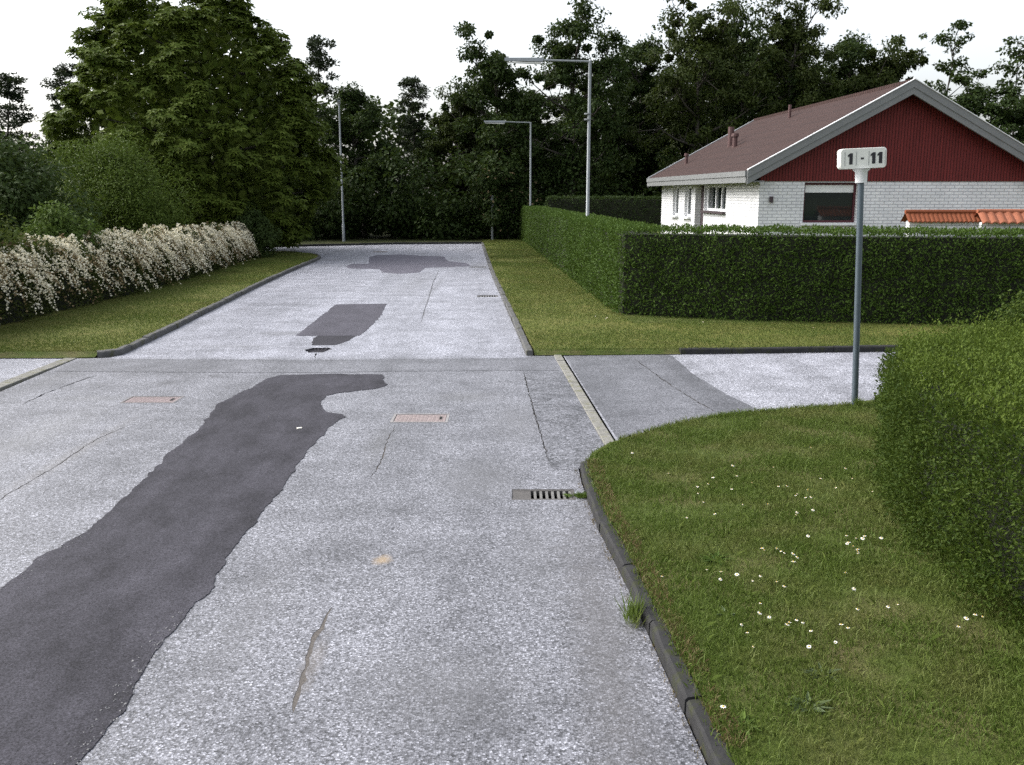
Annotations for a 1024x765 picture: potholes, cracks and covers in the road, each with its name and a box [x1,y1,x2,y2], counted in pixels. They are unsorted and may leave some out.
drain grate [512,489,576,500]
crack [292,606,333,712]
manhole cover [390,414,450,423]
crack [523,371,563,460]
crack [0,425,128,500]
